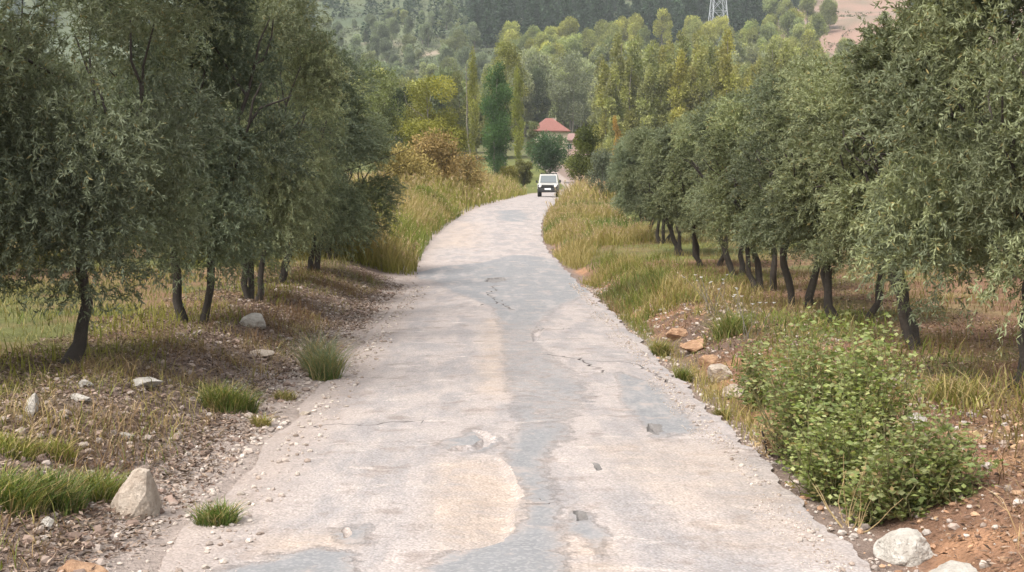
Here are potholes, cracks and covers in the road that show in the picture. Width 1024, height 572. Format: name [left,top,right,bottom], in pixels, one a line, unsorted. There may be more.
pothole [447,429,498,453]
pothole [646,423,664,435]
crack [313,420,445,428]
pothole [573,510,589,521]
crack [526,353,674,386]
